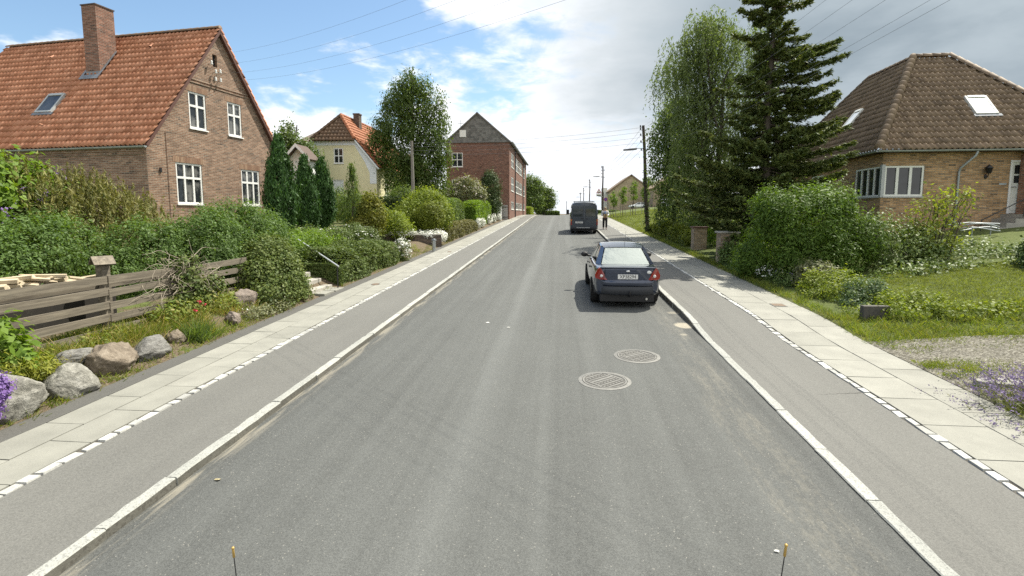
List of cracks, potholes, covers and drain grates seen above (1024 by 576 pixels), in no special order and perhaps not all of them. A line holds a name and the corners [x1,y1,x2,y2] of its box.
manhole cover [614,349,660,363]
manhole cover [578,372,631,390]
